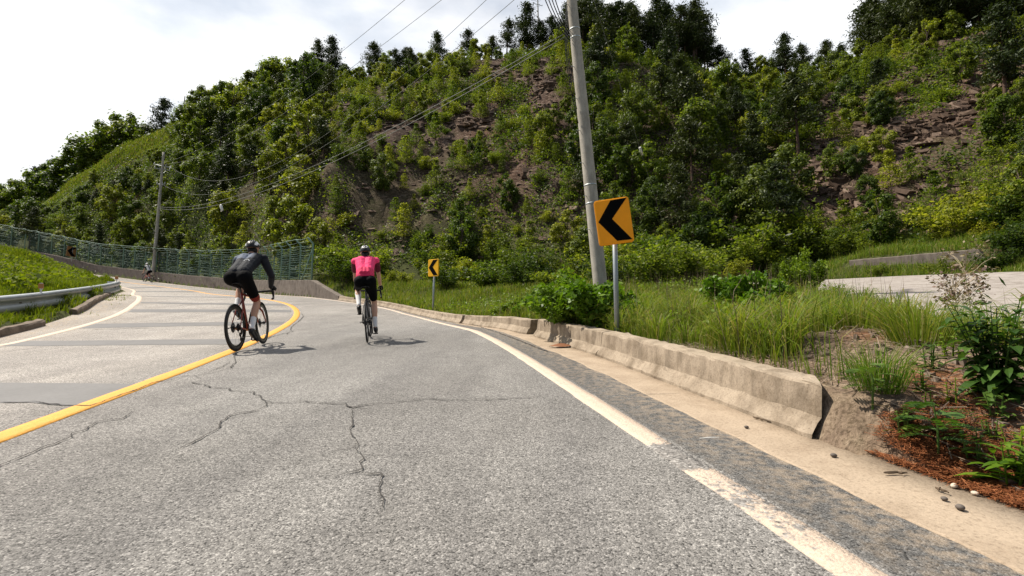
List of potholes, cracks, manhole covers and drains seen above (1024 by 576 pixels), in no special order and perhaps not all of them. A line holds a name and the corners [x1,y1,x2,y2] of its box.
crack [0,353,237,465]
crack [182,382,537,505]
